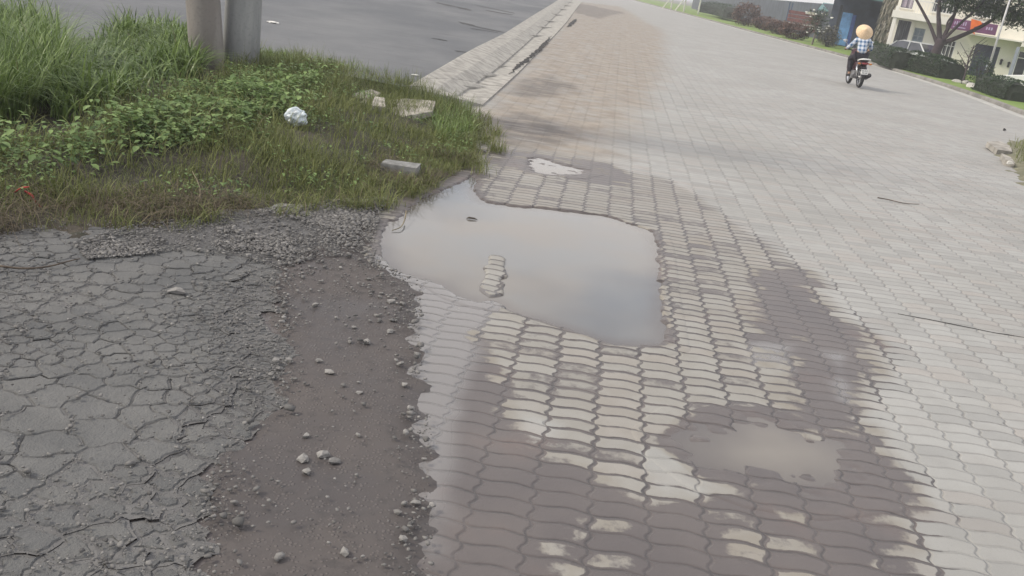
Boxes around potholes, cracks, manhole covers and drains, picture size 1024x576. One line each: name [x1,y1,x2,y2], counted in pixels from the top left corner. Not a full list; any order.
pothole [363,170,691,356]
crack [901,314,1021,337]
crack [0,214,298,576]
crack [434,2,550,74]
